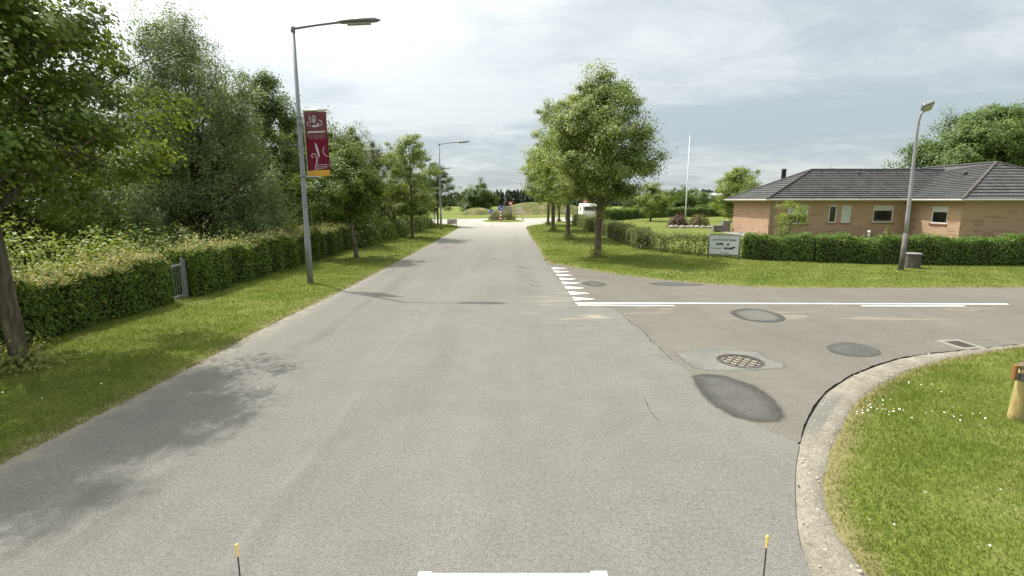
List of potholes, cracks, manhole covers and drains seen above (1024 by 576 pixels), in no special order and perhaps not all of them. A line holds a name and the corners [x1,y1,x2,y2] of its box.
manhole cover [716,354,765,368]
drain grate [935,339,985,349]
